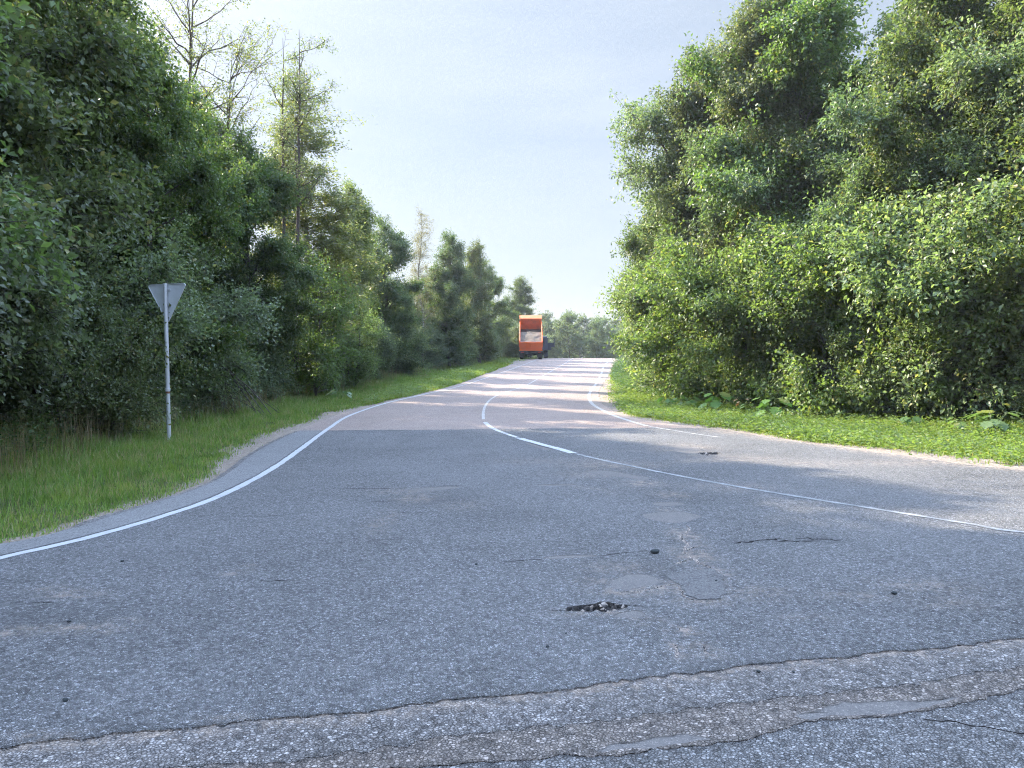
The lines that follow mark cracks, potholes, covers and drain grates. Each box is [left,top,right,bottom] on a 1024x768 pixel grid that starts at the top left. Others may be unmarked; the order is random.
crack [914,717,1024,734]
crack [675,525,713,569]
pothole [564,601,626,613]
